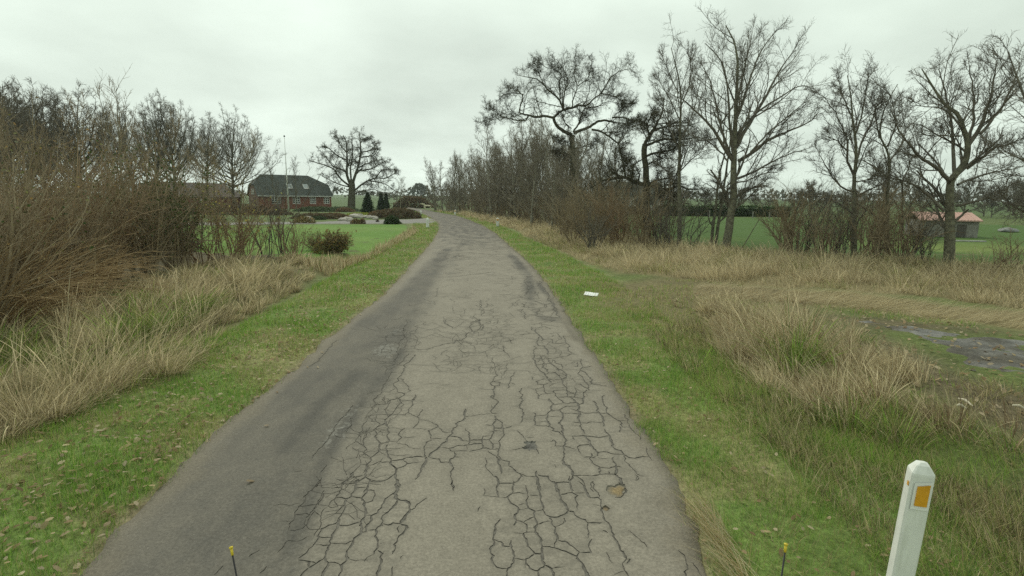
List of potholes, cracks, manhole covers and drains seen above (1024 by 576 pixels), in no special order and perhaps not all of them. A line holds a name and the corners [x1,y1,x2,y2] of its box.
pothole [606,483,626,497]
crack [260,237,652,576]
pothole [522,441,537,451]
